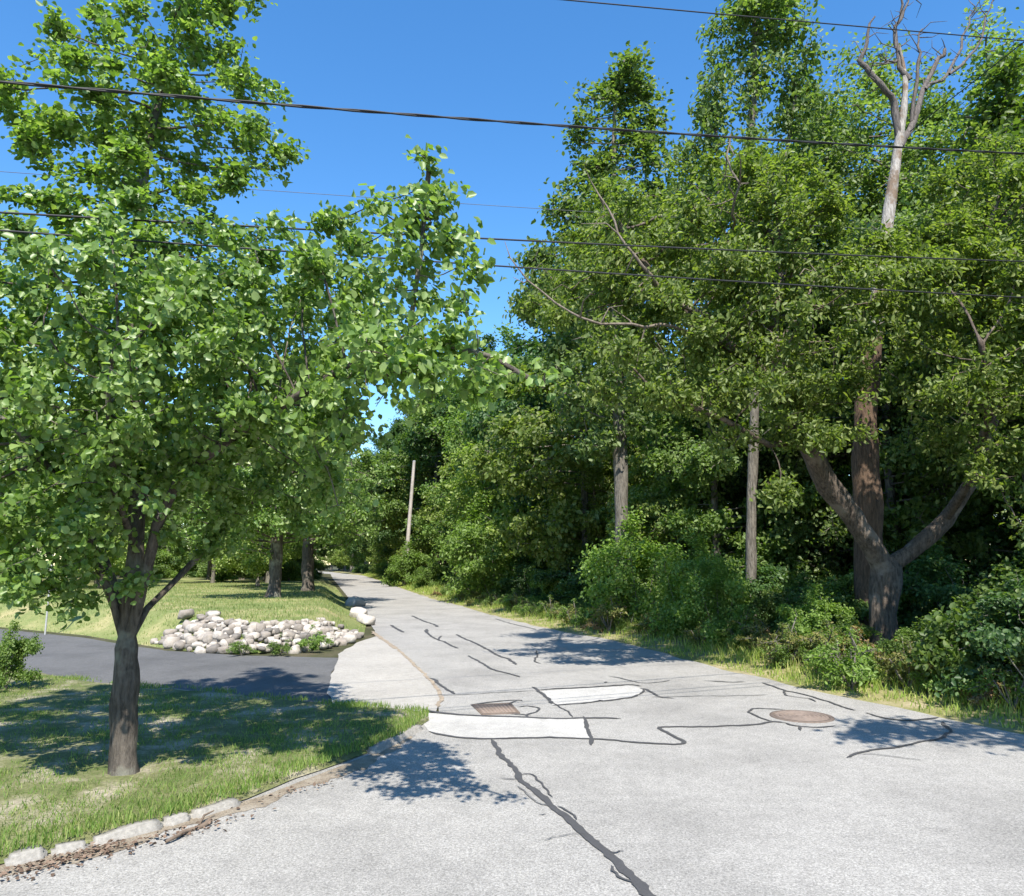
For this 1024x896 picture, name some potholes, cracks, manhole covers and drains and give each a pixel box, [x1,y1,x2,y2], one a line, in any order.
manhole cover [769,710,835,723]
crack [605,676,952,760]
crack [390,616,541,717]
